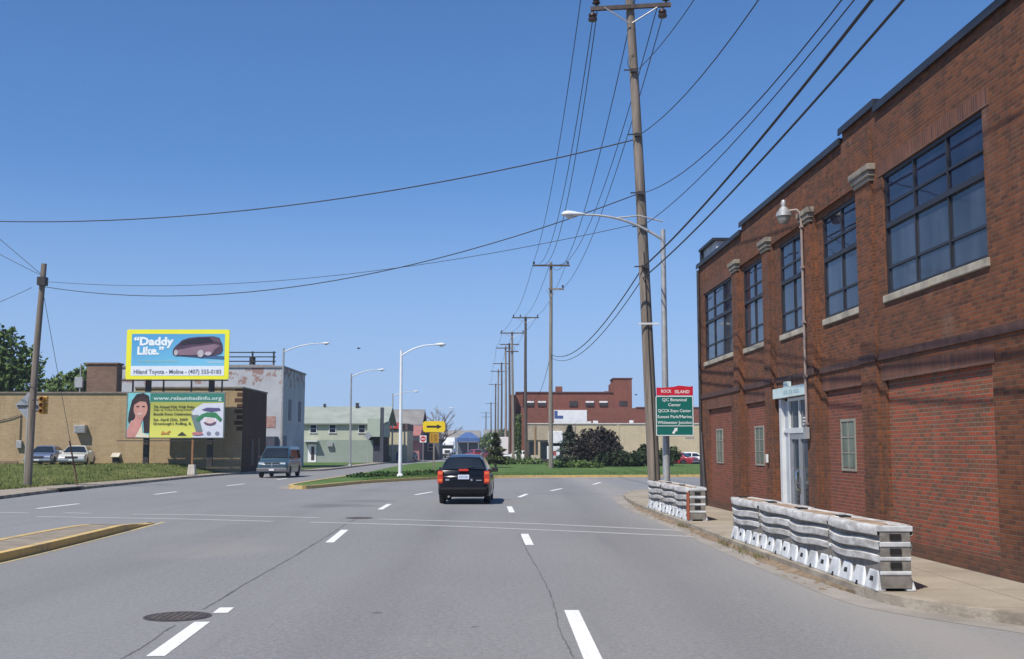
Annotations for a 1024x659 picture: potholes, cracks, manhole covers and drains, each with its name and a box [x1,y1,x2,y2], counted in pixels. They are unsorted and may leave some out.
crack [520,535,574,659]
manhole cover [143,611,212,621]
crack [121,519,355,659]
